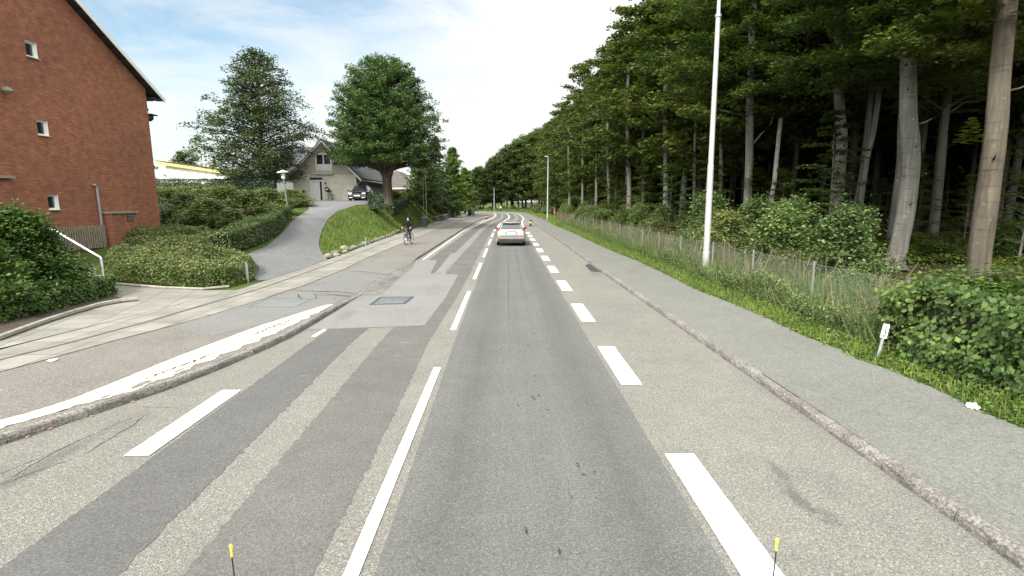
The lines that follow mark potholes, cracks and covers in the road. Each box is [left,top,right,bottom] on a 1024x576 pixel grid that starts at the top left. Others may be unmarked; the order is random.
manhole cover [369,296,415,305]
crack [0,406,171,484]
manhole cover [249,298,312,308]
